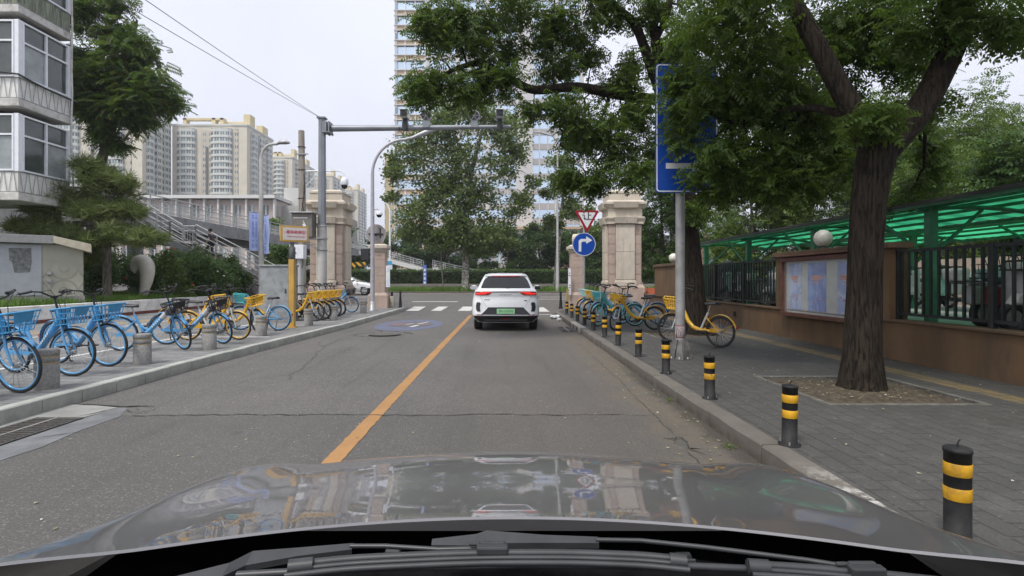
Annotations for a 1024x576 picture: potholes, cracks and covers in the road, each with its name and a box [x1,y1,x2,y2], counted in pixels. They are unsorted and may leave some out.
drain grate [0,417,84,446]
crack [239,330,413,384]
